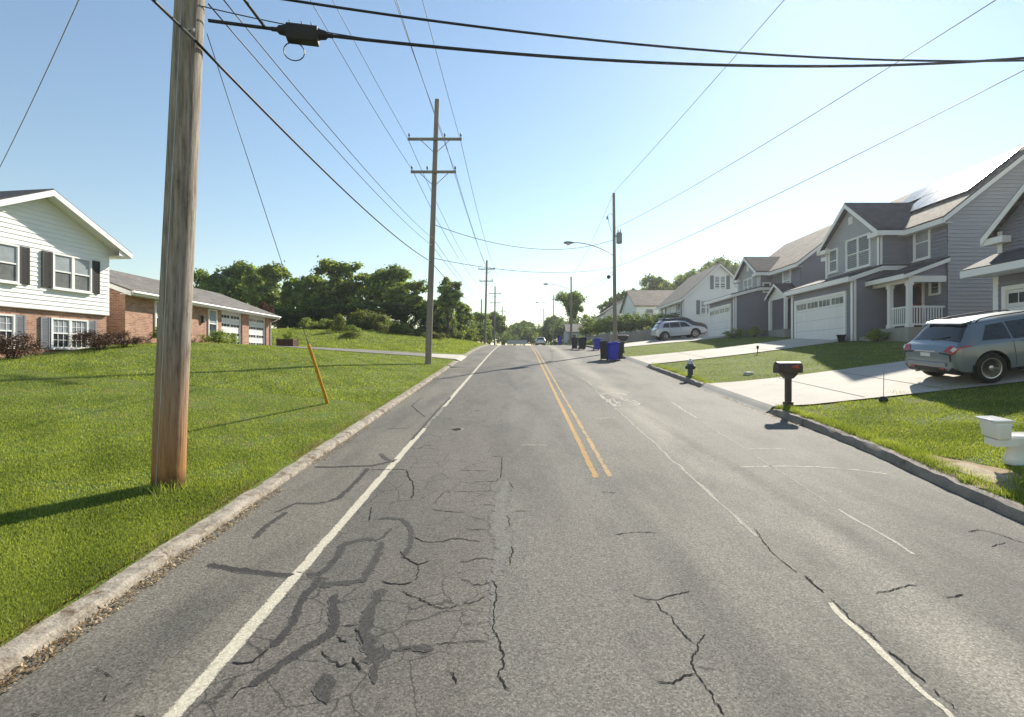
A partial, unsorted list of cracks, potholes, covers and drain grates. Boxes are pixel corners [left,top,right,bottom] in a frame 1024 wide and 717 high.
crack [321,627,364,671]
crack [755,529,956,709]
crack [634,591,724,715]
crack [382,458,514,689]
